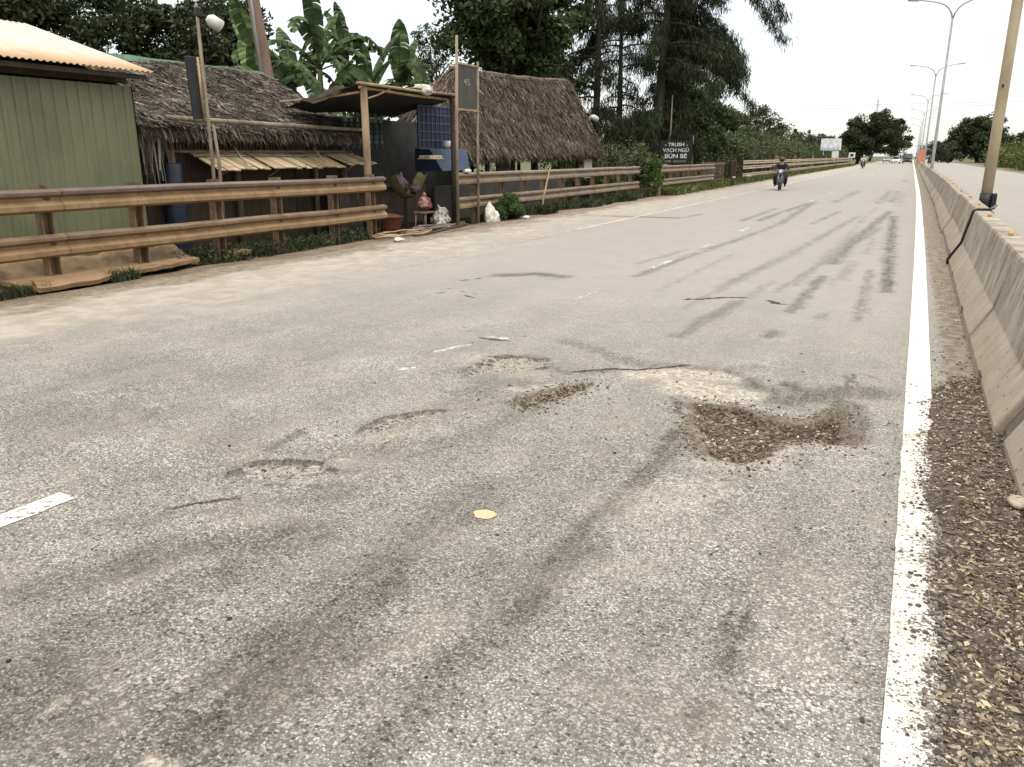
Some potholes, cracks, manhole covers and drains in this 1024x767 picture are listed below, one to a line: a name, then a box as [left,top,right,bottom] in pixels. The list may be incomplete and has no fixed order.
crack [571,364,690,373]
crack [683,297,787,305]
pothole [683,401,849,467]
crack [167,498,240,509]
pothole [357,409,451,439]
pothole [220,459,340,485]
pothole [514,381,597,409]
pothole [459,355,554,380]
